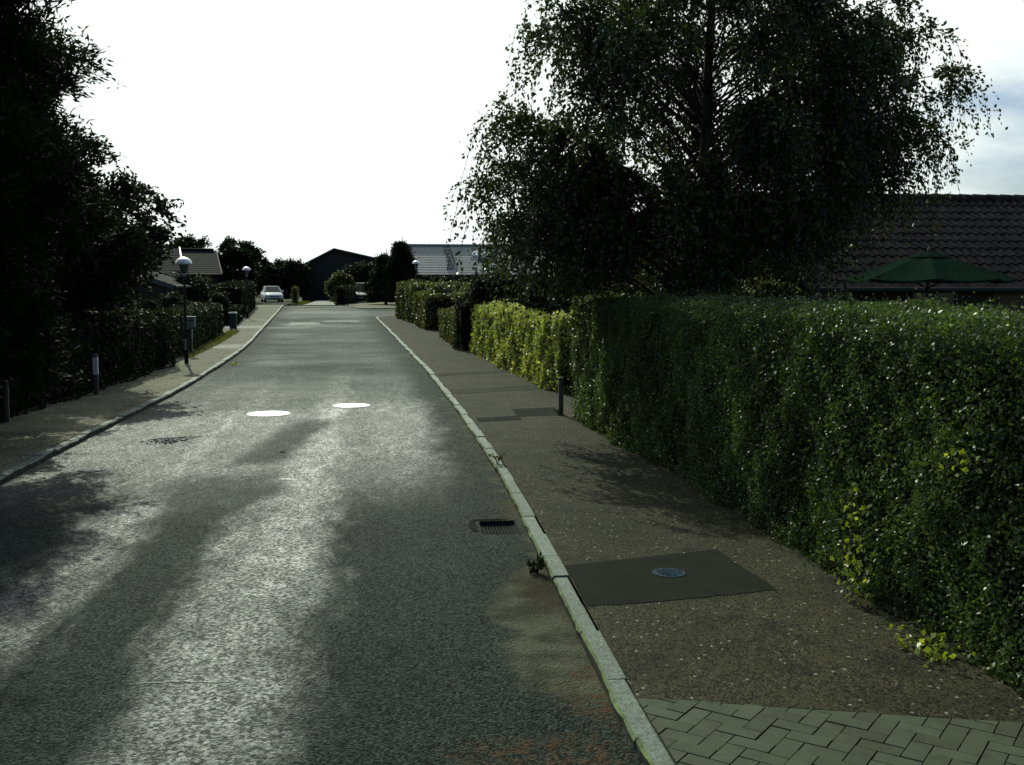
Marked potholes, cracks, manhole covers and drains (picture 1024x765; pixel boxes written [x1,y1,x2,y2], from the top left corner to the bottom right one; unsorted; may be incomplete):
drain grate [468,518,522,535]
utility cover [653,568,685,577]
